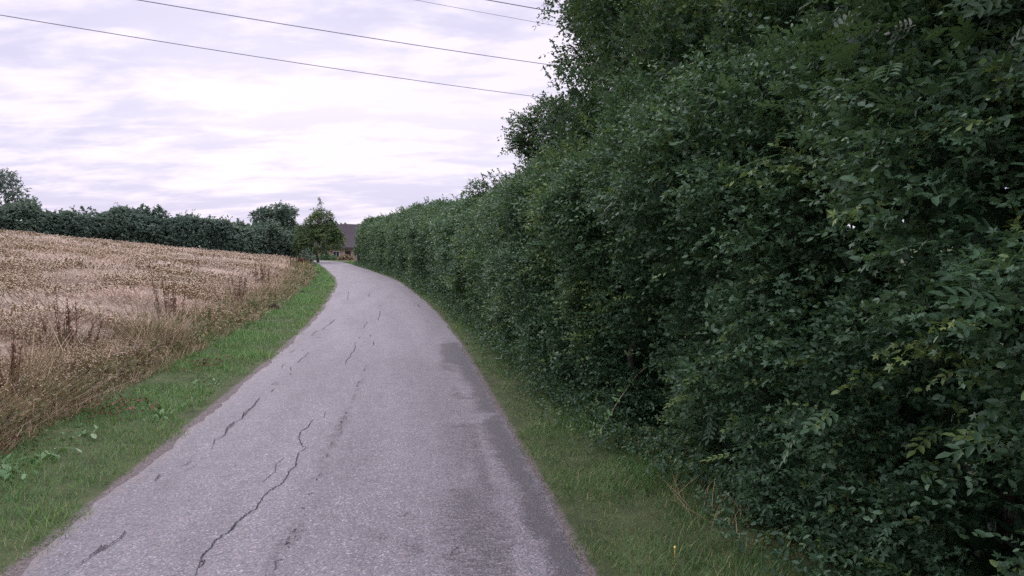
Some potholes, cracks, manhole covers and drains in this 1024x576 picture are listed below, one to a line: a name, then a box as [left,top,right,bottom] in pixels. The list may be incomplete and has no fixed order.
crack [182,319,335,470]
crack [63,530,126,576]
crack [196,413,325,574]
